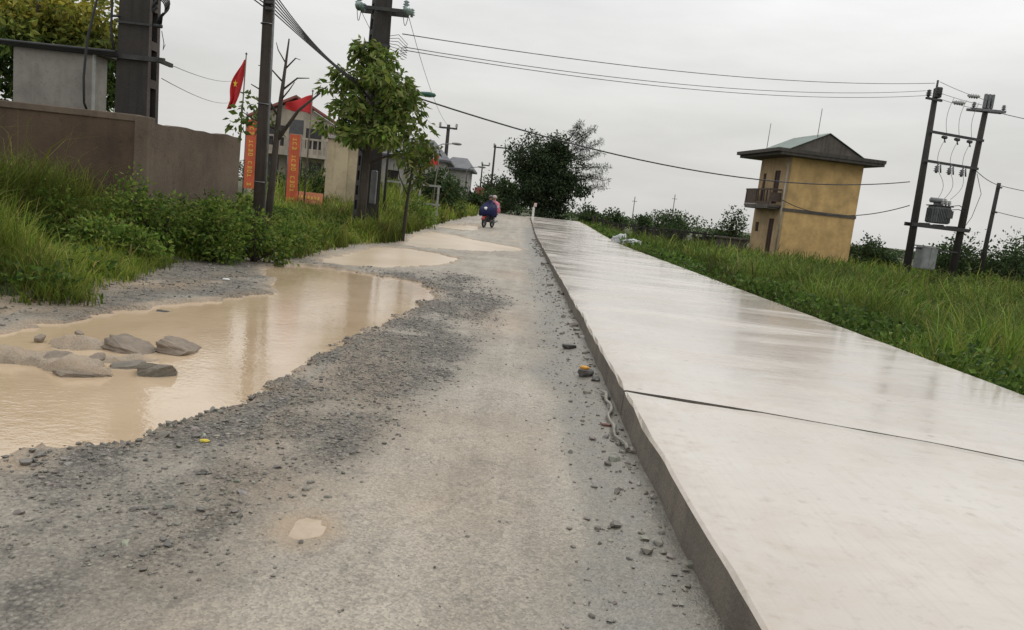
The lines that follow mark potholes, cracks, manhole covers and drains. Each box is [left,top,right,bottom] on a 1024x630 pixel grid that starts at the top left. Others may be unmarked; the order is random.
pothole [311,246,463,268]
pothole [438,222,481,230]
pothole [397,231,526,252]
pothole [275,512,336,544]
pothole [0,262,446,471]
